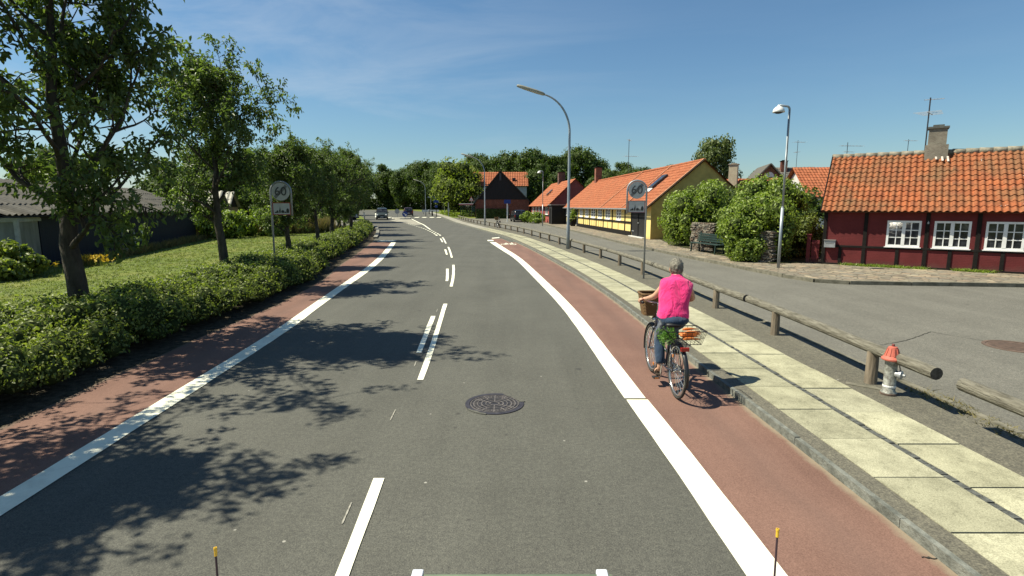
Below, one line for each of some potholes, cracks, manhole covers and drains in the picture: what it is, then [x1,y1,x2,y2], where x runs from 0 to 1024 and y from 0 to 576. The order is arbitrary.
manhole cover [465,393,525,415]
manhole cover [981,340,1024,353]
